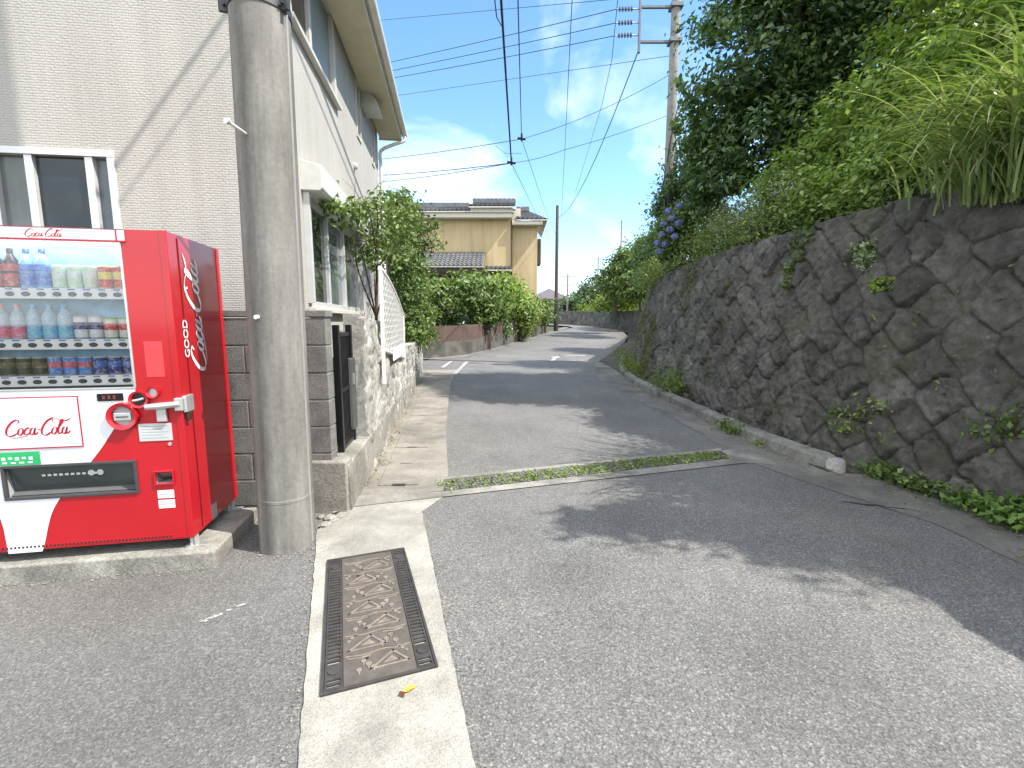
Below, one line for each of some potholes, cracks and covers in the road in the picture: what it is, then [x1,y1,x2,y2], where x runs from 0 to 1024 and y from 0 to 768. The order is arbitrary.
drain grate [633,453,730,468]
crack [842,500,917,511]
drain grate [544,460,645,479]
drain grate [437,470,550,492]
